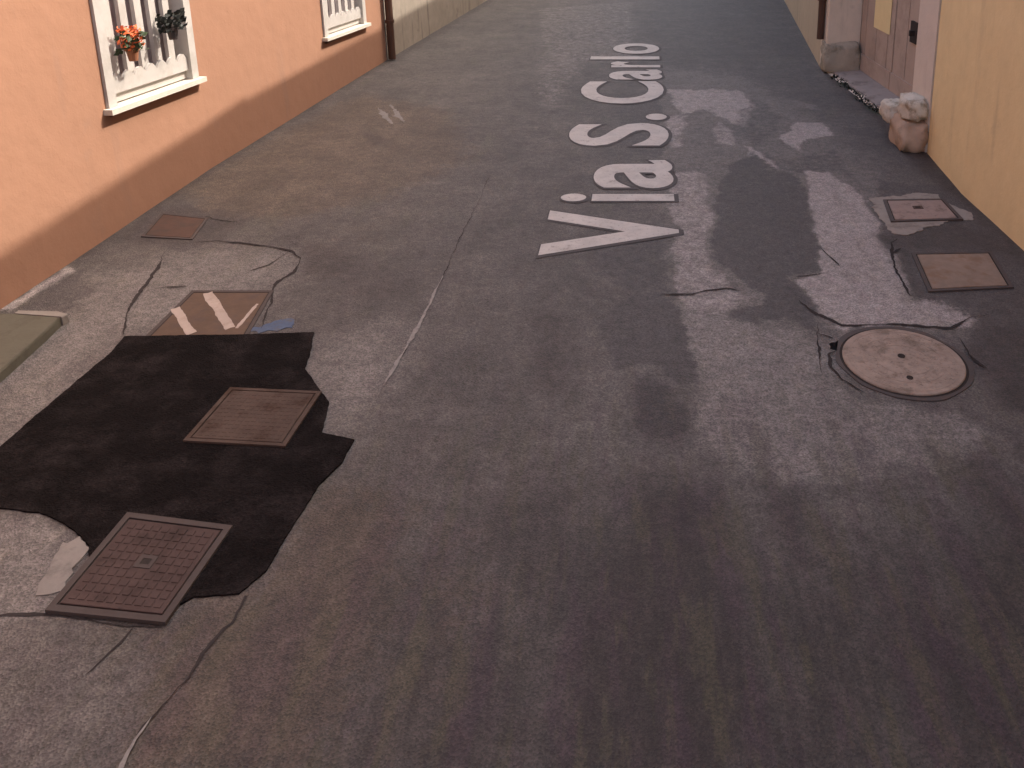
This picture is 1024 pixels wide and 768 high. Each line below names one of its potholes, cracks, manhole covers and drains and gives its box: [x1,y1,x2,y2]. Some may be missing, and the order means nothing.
crack [0,595,247,768]
manhole cover [183,387,322,448]
manhole cover [45,512,233,625]
crack [799,300,988,392]
crack [890,239,911,296]
crack [123,252,181,334]
crack [374,176,490,406]
manhole cover [835,326,974,402]
manhole cover [146,290,274,336]
crack [797,247,840,277]
manhole cover [869,193,973,236]
crack [202,240,301,328]
